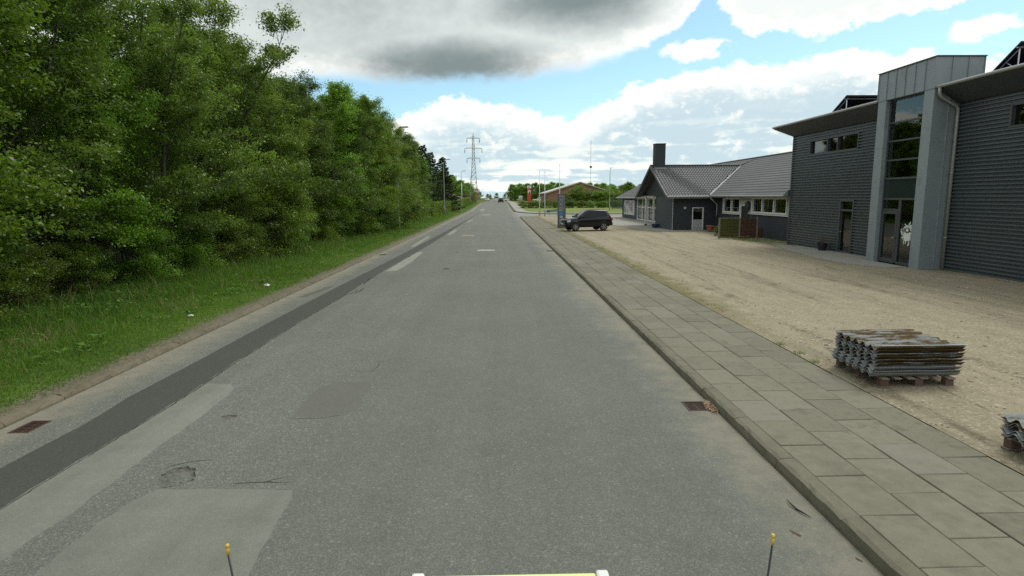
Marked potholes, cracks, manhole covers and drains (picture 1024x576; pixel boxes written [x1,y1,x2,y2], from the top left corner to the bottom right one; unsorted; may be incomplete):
drain grate [8,420,52,433]
drain grate [681,401,711,411]
pothole [159,466,196,486]
